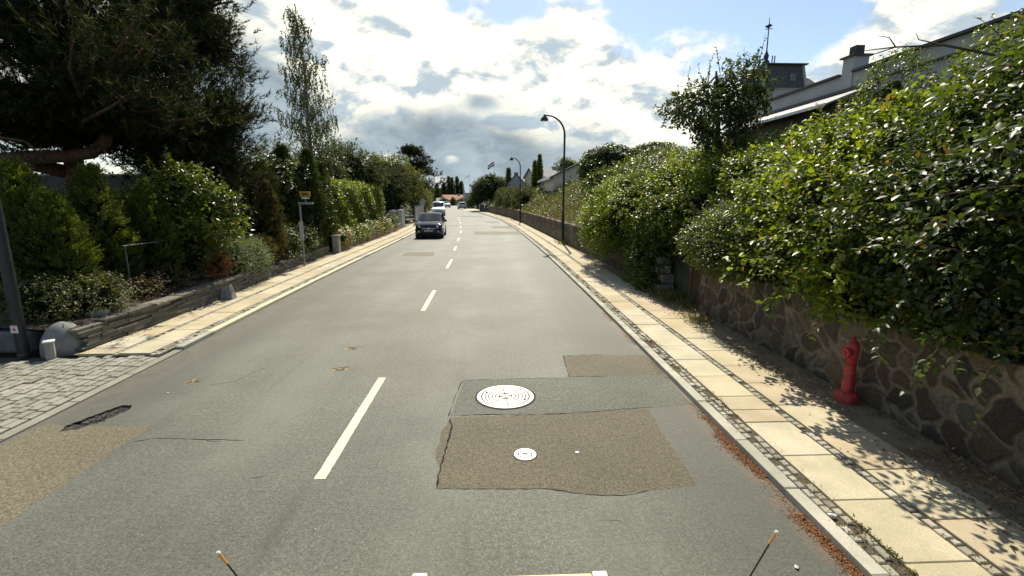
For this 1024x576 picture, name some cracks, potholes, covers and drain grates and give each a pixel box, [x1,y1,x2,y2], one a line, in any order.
utility cover [513,448,537,461]
manhole cover [475,385,536,410]
pothole [60,405,132,432]
